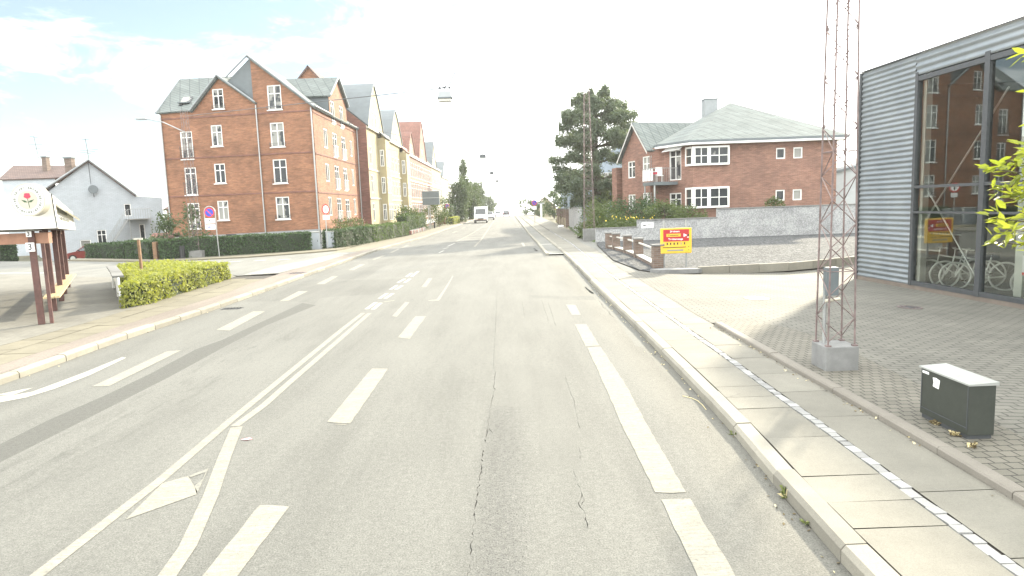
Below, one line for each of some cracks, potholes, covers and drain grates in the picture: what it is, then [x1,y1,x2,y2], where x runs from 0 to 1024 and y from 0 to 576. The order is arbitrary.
crack [467,302,497,575]
